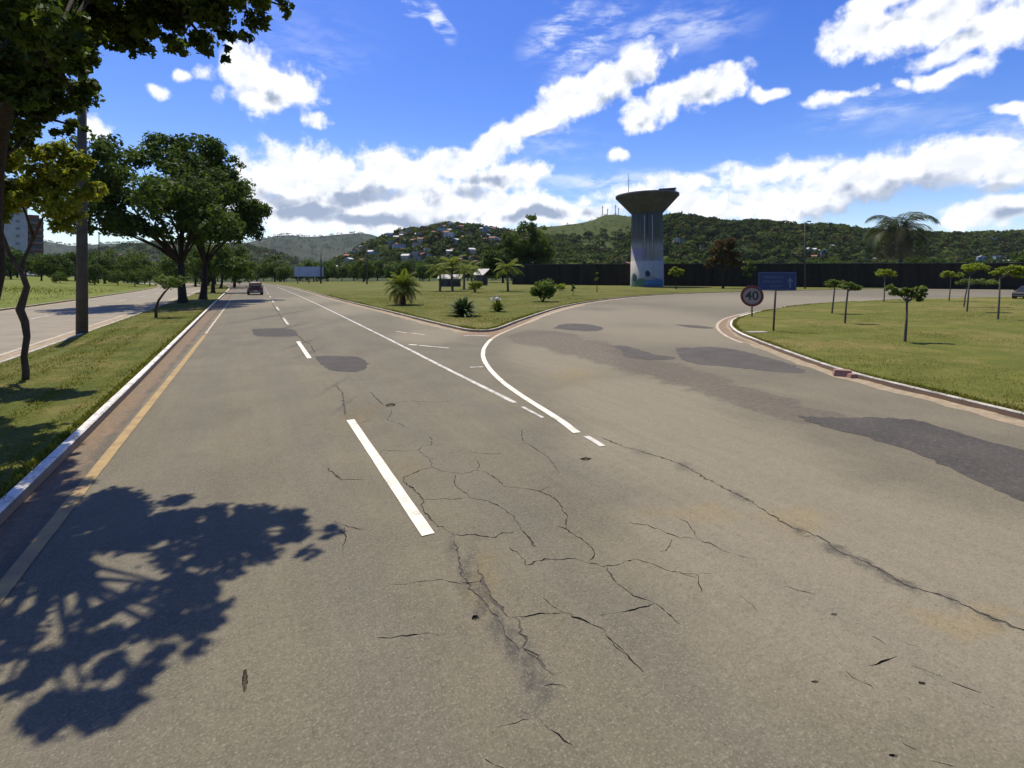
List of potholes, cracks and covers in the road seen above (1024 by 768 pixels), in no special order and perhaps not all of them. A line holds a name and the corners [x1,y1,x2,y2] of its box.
crack [514,599,643,672]
crack [381,437,693,624]
crack [630,517,755,560]
crack [498,710,572,745]
